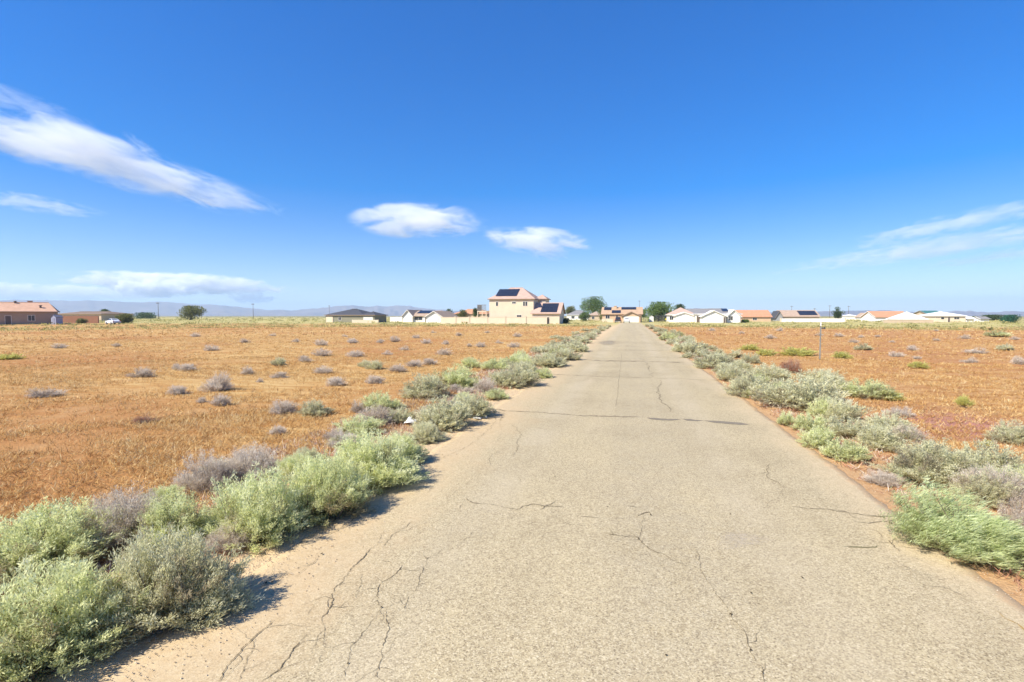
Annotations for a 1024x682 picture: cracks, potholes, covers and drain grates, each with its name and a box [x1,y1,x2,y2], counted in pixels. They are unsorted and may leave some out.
crack [219,524,489,682]
crack [453,493,588,528]
crack [608,506,765,682]
crack [763,461,980,595]
